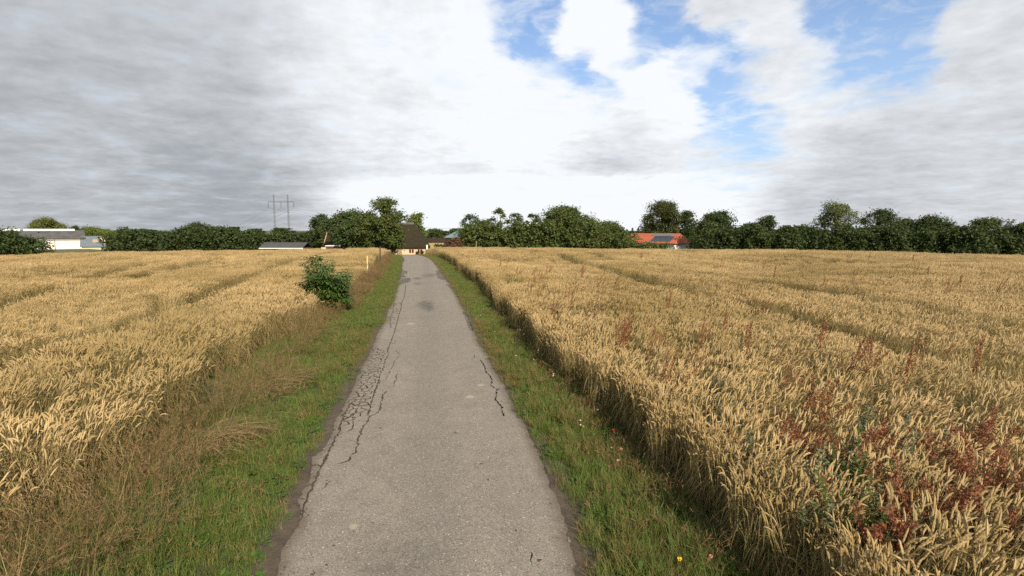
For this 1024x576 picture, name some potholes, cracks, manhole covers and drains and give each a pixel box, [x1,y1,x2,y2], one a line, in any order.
crack [299,286,406,519]
crack [474,355,506,416]
